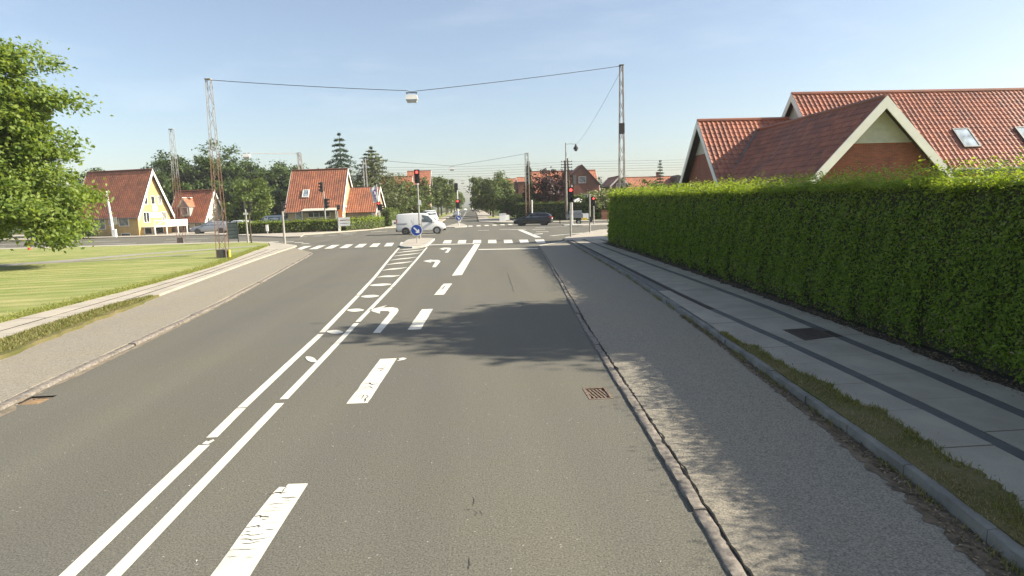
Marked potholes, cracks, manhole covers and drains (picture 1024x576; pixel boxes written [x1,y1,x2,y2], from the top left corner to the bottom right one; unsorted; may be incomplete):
drain grate [582,387,614,400]
manhole cover [783,327,835,341]
